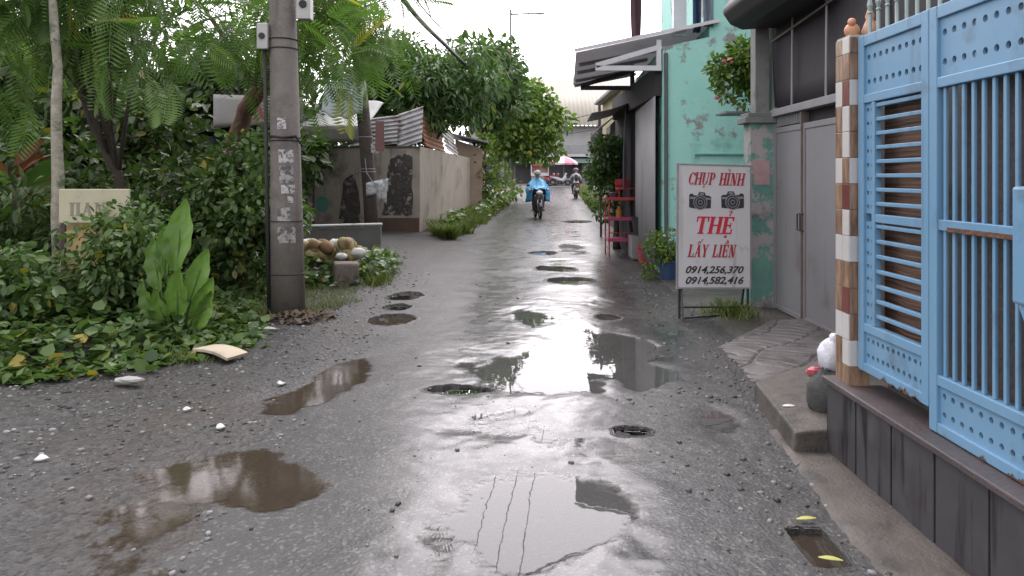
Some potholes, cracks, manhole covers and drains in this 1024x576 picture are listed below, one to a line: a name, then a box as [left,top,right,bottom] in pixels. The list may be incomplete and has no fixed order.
pothole [381,291,429,302]
pothole [542,277,601,286]
pothole [363,313,421,327]
pothole [379,303,415,311]
